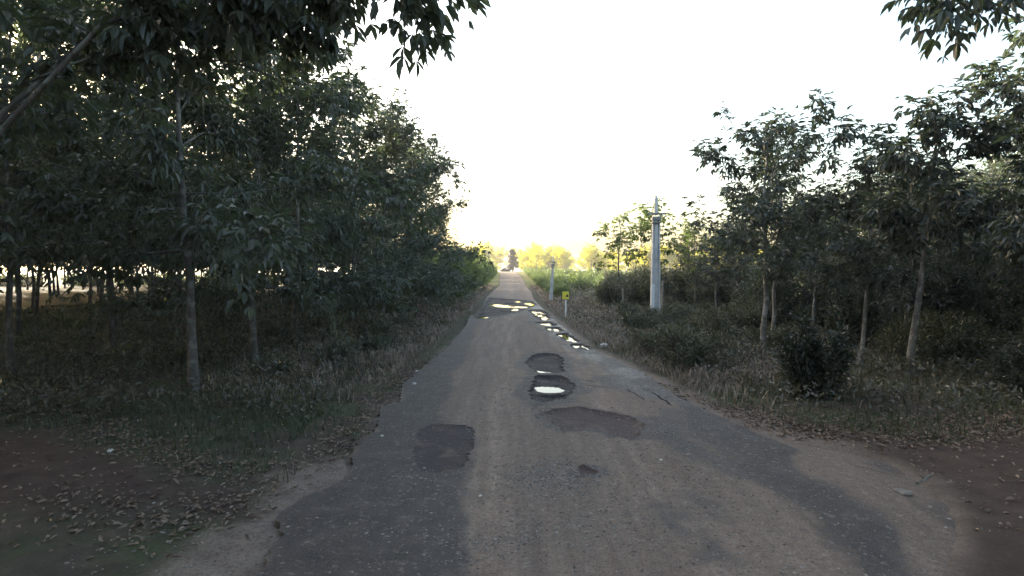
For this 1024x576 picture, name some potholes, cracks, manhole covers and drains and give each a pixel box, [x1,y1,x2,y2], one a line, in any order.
pothole [473,298,538,319]
pothole [527,309,553,321]
pothole [527,374,578,403]
pothole [540,406,646,441]
pothole [525,353,565,373]
crack [627,389,687,406]
pothole [578,464,599,474]
